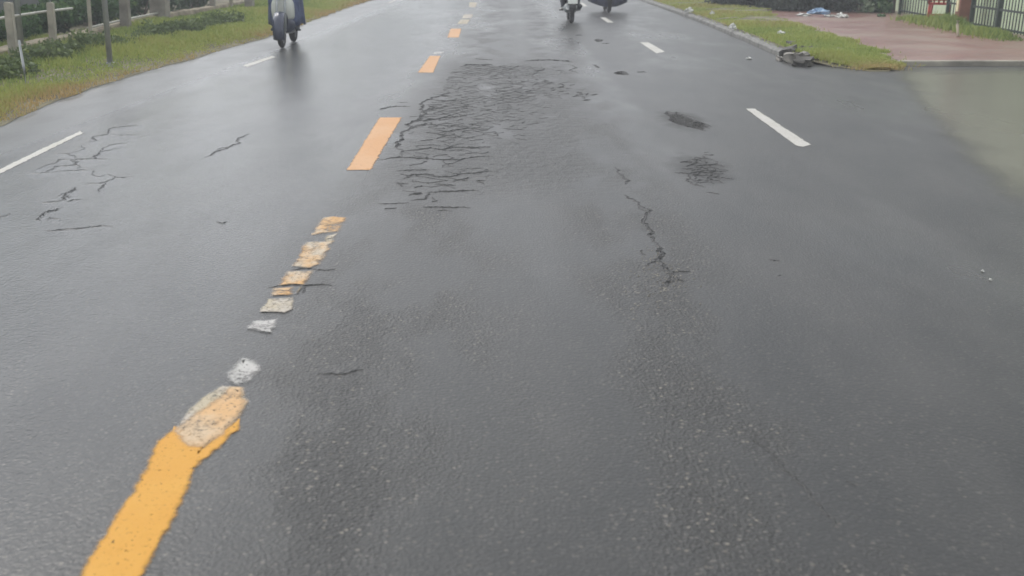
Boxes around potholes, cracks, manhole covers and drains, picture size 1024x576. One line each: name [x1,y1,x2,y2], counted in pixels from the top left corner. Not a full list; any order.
crack [32,125,140,231]
pothole [663,111,712,131]
crack [752,434,856,526]
crack [614,152,732,323]
crack [268,268,335,300]
crack [377,58,600,211]
crack [205,134,248,157]
